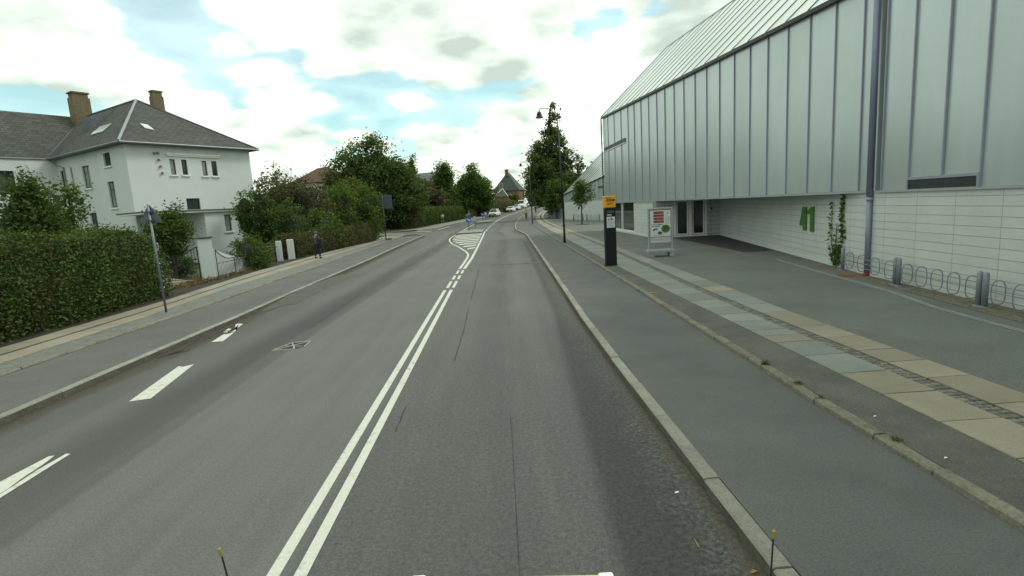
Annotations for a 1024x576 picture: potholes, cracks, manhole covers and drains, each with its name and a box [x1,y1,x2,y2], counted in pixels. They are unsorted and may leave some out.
manhole cover [271,341,311,351]
